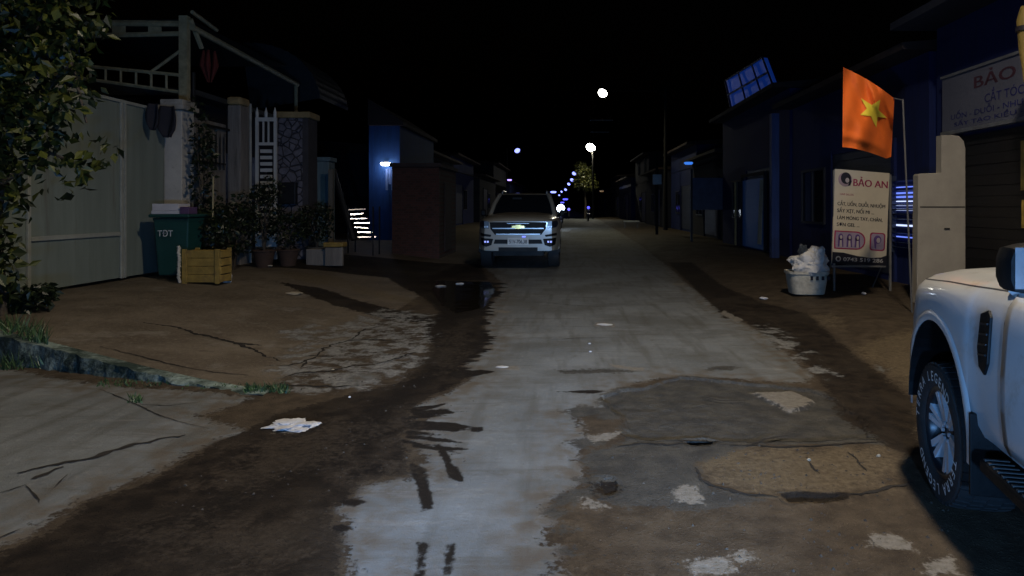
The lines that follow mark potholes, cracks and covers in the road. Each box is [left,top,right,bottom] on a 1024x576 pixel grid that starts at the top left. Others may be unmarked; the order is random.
crack [617,435,913,497]
crack [100,389,205,428]
crack [101,322,415,387]
pothole [680,437,721,446]
pothole [773,489,850,505]
